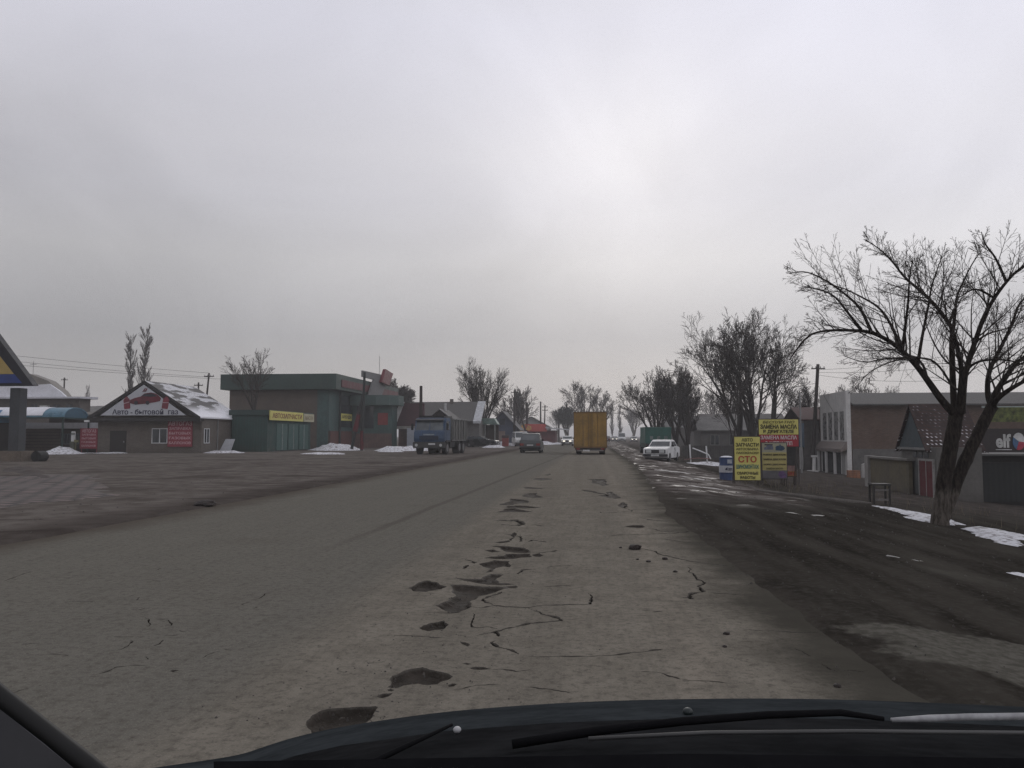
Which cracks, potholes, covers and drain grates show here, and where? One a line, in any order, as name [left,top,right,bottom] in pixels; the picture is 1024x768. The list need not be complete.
pothole [409,581,446,592]
pothole [420,620,449,631]
crack [600,506,754,599]
crack [428,519,725,693]
pothole [479,560,511,573]
pothole [306,706,378,733]
pothole [387,667,453,688]
pothole [436,585,518,613]
